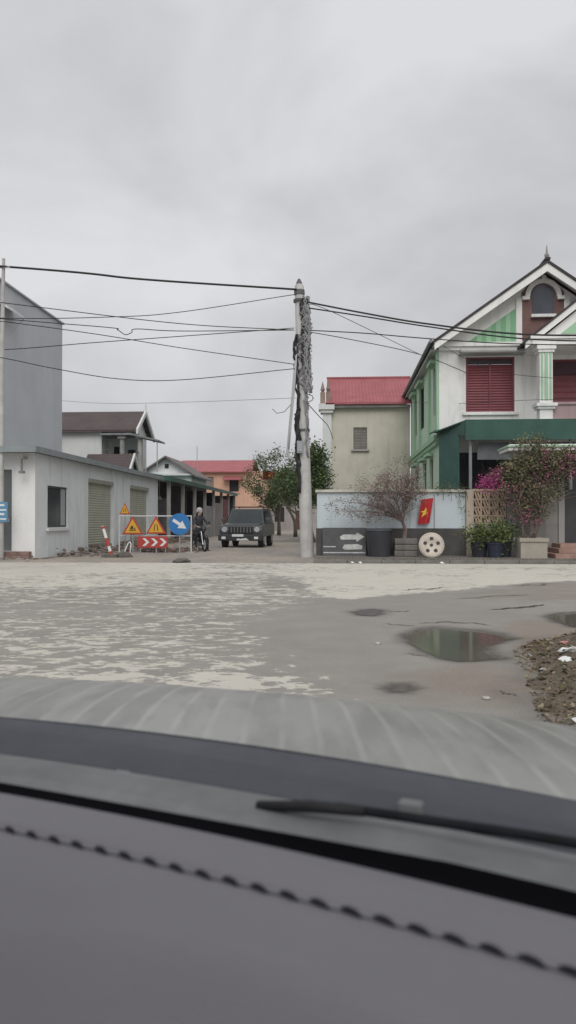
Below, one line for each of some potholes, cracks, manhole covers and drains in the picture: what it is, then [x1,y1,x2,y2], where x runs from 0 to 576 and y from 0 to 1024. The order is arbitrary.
pothole [405,628,512,662]
pothole [387,684,415,692]
pothole [549,613,576,627]
crack [388,583,548,626]
